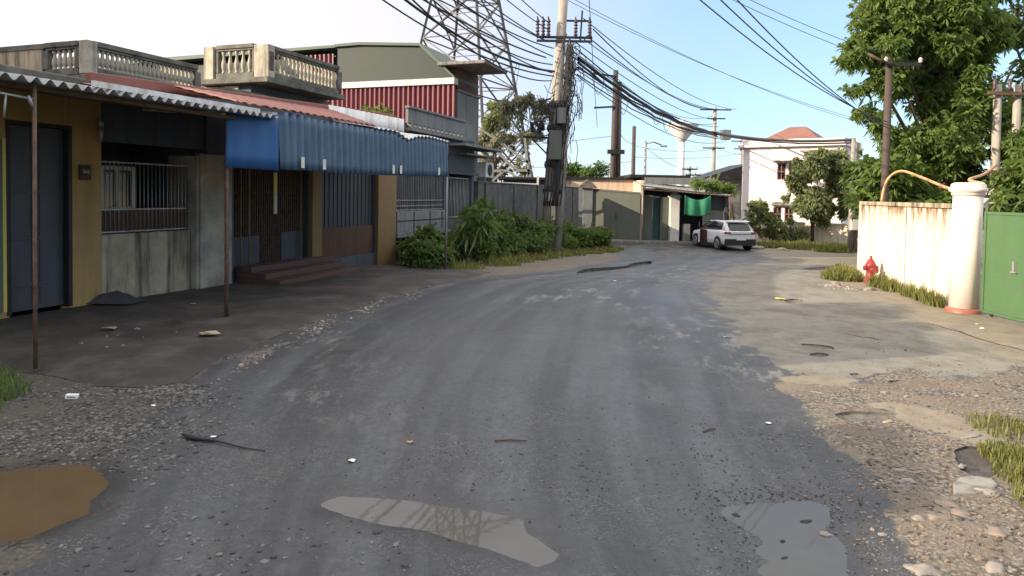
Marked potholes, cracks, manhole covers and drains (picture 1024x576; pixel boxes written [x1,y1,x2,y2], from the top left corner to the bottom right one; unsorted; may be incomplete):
pothole [321,496,559,567]
pothole [0,465,109,543]
pothole [954,446,999,478]
pothole [835,411,890,421]
crack [919,321,1024,351]
pothole [721,500,849,576]
